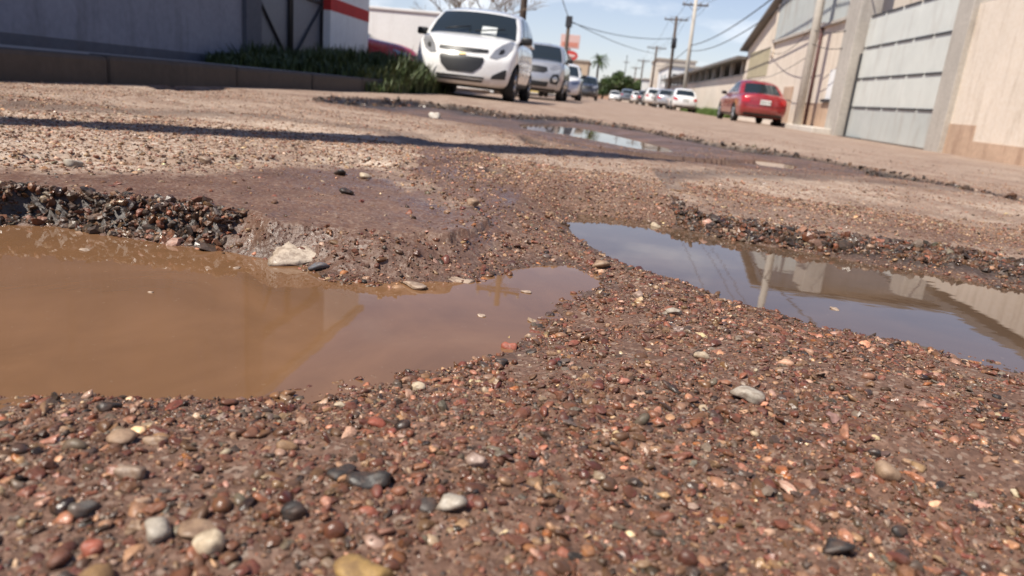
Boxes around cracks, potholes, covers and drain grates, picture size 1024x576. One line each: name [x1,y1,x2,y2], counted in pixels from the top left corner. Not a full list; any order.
pothole [0,181,623,414]
pothole [475,186,1024,371]
pothole [306,95,1023,202]
